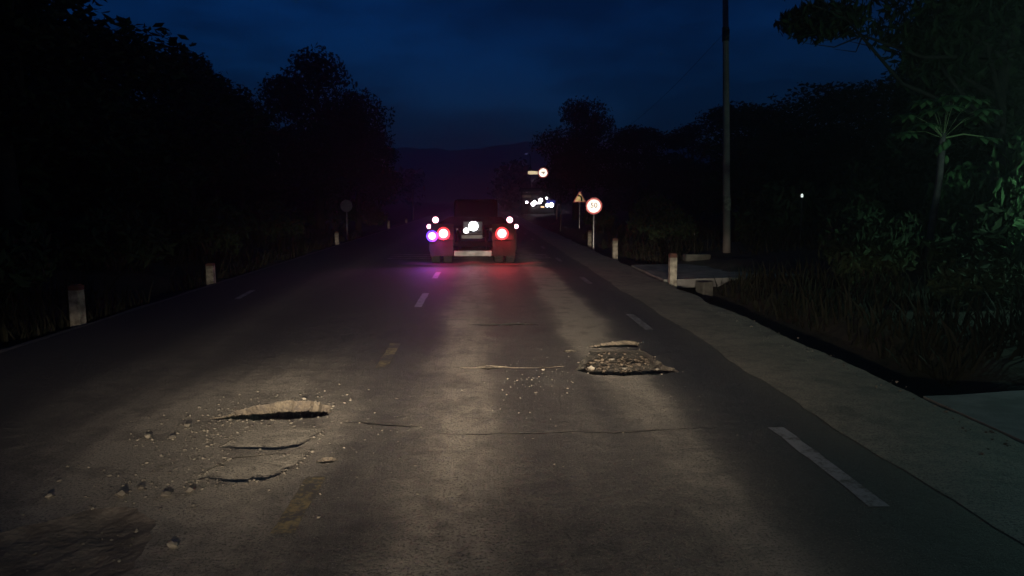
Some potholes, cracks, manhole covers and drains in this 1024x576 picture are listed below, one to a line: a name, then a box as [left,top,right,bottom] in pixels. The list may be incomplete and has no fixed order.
pothole [209,400,332,429]
pothole [575,350,679,376]
crack [468,427,719,435]
